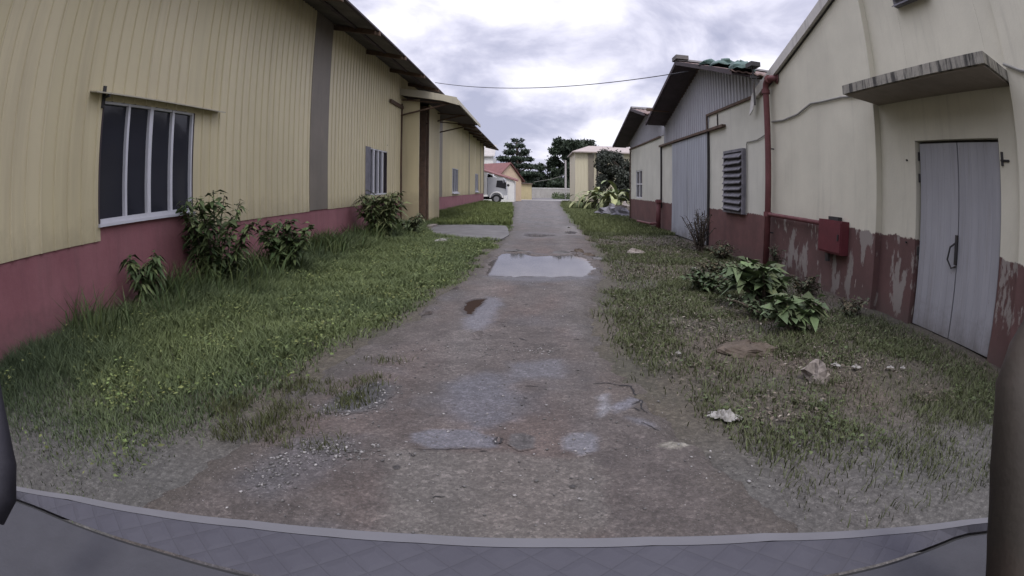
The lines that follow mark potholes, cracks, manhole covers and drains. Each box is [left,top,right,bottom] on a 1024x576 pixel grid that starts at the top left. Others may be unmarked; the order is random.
pothole [460,297,489,315]
crack [594,382,658,430]
pothole [480,251,598,278]
